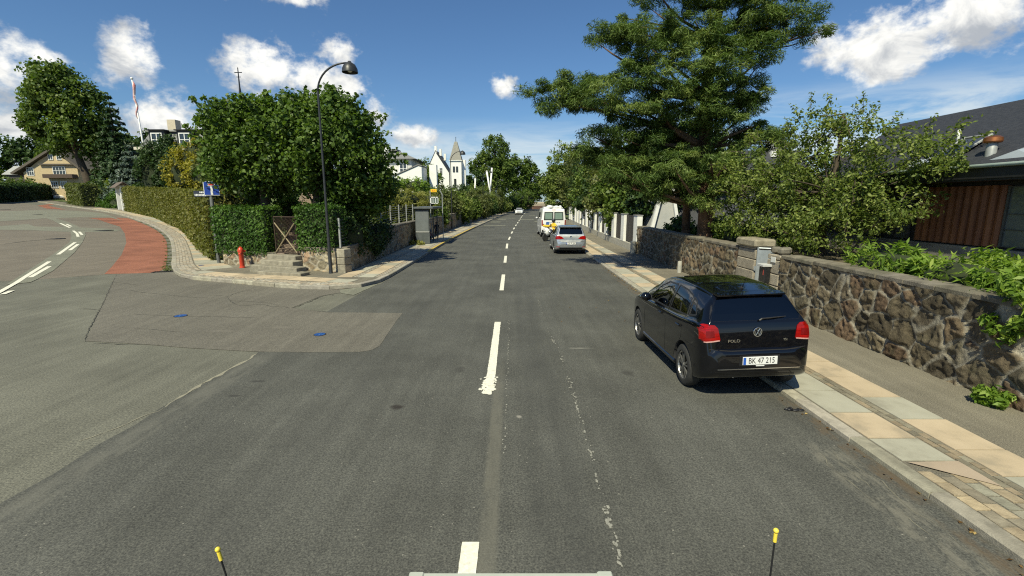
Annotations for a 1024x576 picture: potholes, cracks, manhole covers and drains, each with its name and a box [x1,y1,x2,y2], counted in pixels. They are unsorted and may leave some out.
crack [138,289,333,332]
crack [85,275,197,344]
